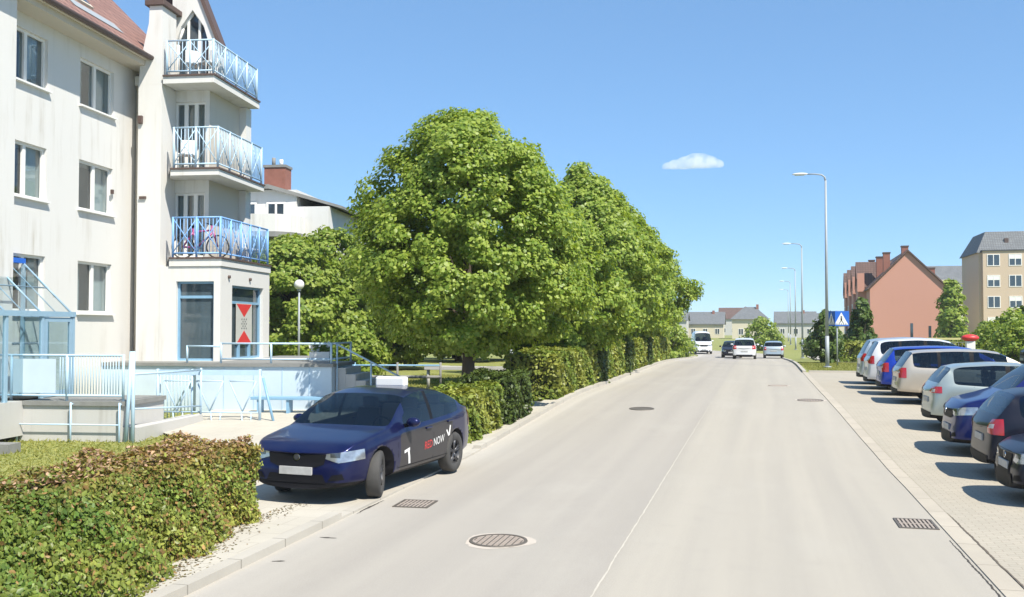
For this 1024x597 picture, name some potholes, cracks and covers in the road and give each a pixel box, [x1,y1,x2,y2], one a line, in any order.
drain grate [392,499,438,508]
drain grate [893,518,940,530]
manhole cover [465,533,536,549]
